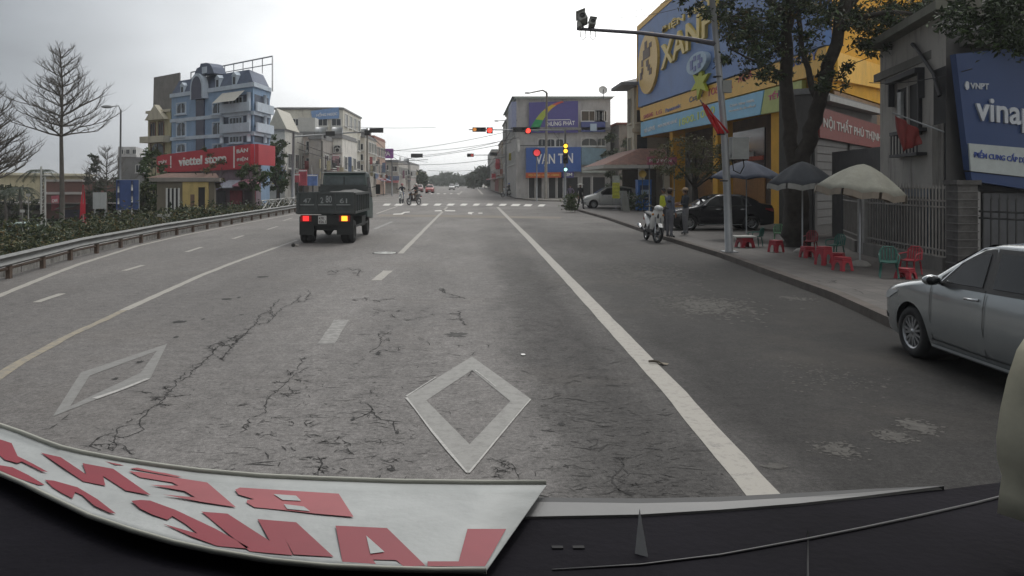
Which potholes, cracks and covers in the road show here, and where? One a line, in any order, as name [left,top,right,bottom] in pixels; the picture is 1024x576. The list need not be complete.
crack [239,357,355,476]
crack [547,345,702,497]
crack [340,288,490,391]
crack [490,457,521,479]
crack [85,290,328,455]
crack [349,389,439,479]
